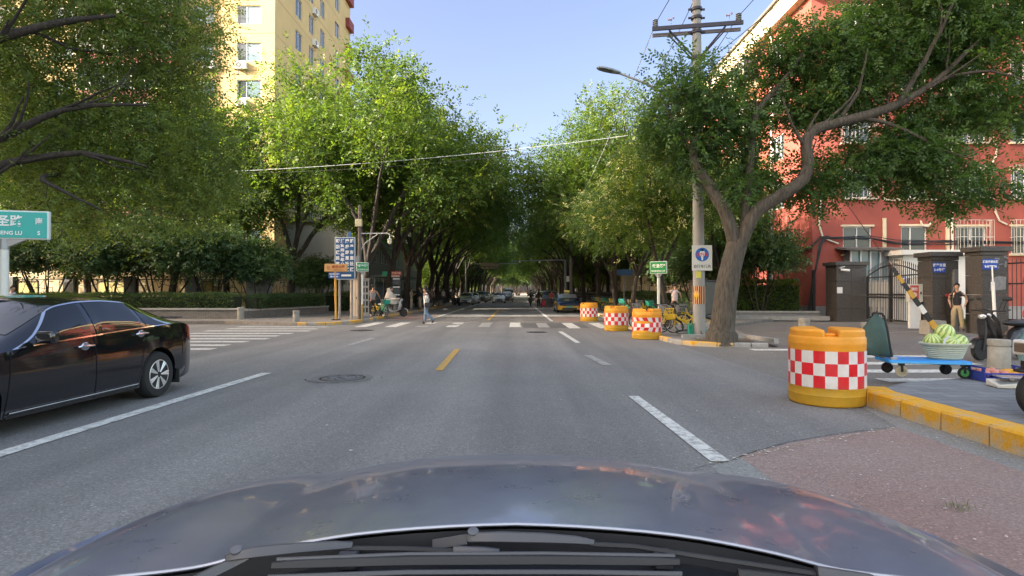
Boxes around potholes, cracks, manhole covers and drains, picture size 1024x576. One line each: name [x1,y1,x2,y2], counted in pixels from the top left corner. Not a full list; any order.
manhole cover [310,374,373,383]
